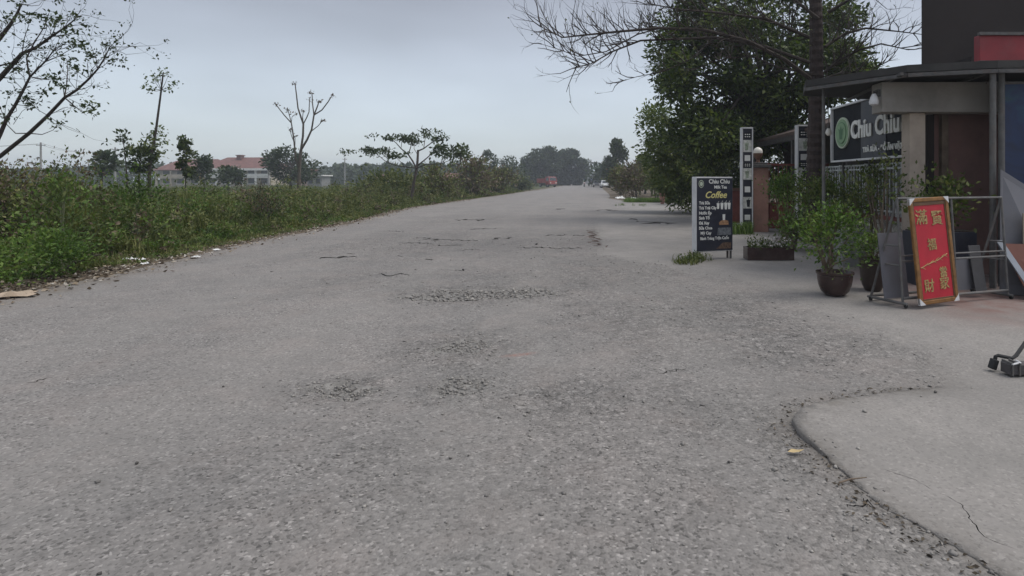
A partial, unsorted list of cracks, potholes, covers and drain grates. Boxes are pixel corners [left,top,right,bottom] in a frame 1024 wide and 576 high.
pothole [395,288,561,302]
pothole [304,380,383,402]
pothole [426,338,494,355]
crack [376,219,607,276]
pothole [431,375,492,398]
crack [887,470,1012,548]
